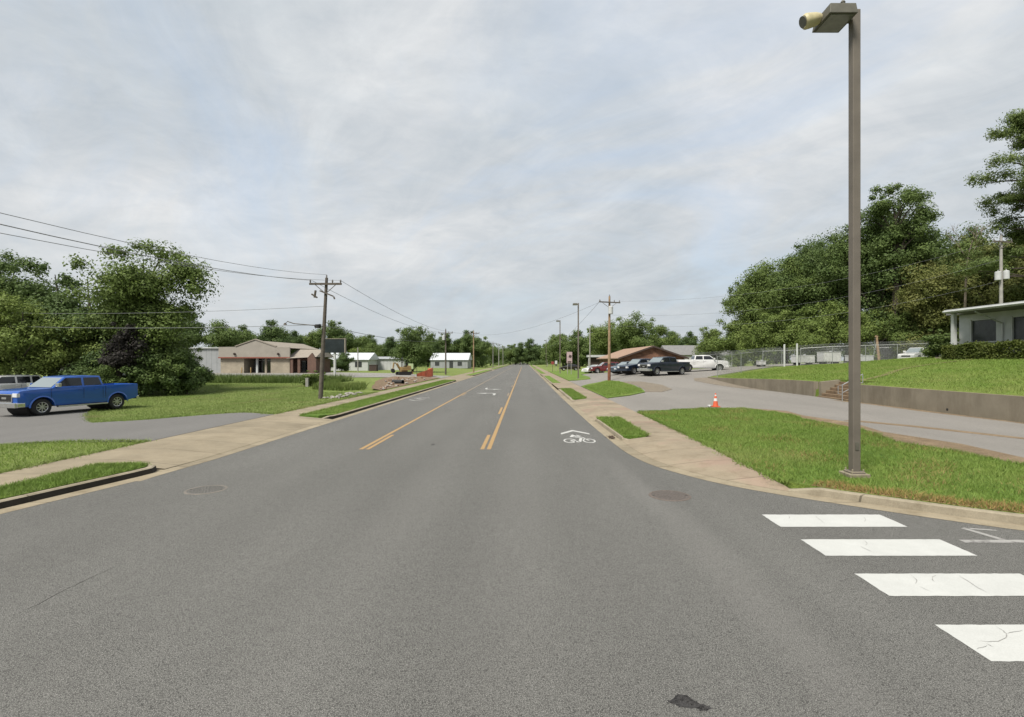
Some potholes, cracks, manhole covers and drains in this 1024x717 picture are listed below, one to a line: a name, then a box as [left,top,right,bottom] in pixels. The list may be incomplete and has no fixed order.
manhole cover [649,490,691,501]
manhole cover [183,485,228,495]
pothole [667,694,717,711]
